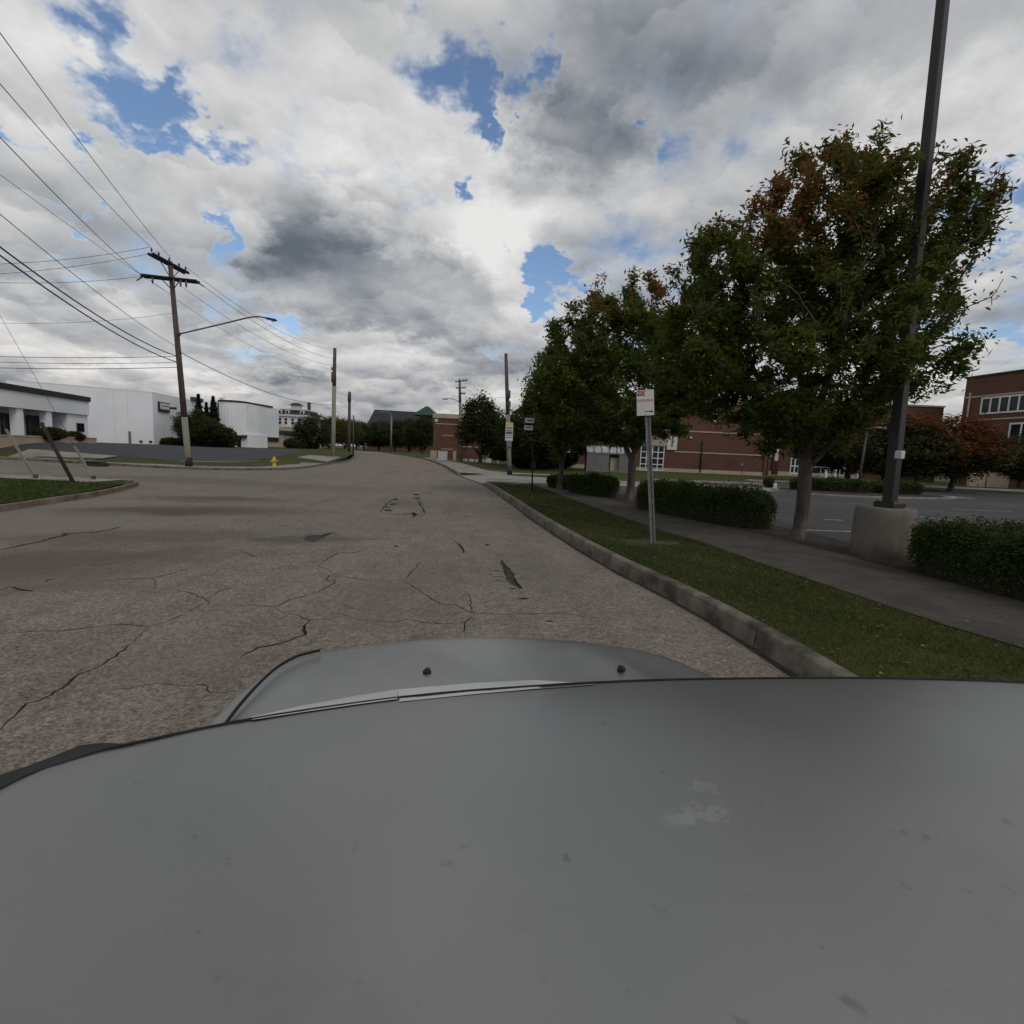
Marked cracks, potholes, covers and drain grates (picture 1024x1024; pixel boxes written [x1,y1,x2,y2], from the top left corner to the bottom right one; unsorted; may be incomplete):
pothole [304,532,334,542]
crack [1,527,119,550]
crack [0,547,648,730]
pothole [500,560,522,589]
